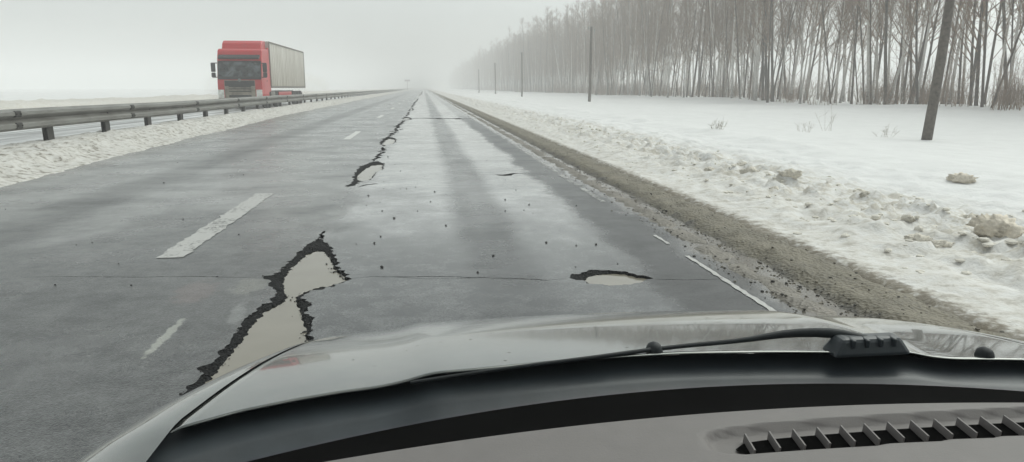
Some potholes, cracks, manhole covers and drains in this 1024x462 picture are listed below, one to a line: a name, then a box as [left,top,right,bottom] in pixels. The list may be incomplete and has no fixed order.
pothole [570,270,653,286]
pothole [182,239,351,395]
